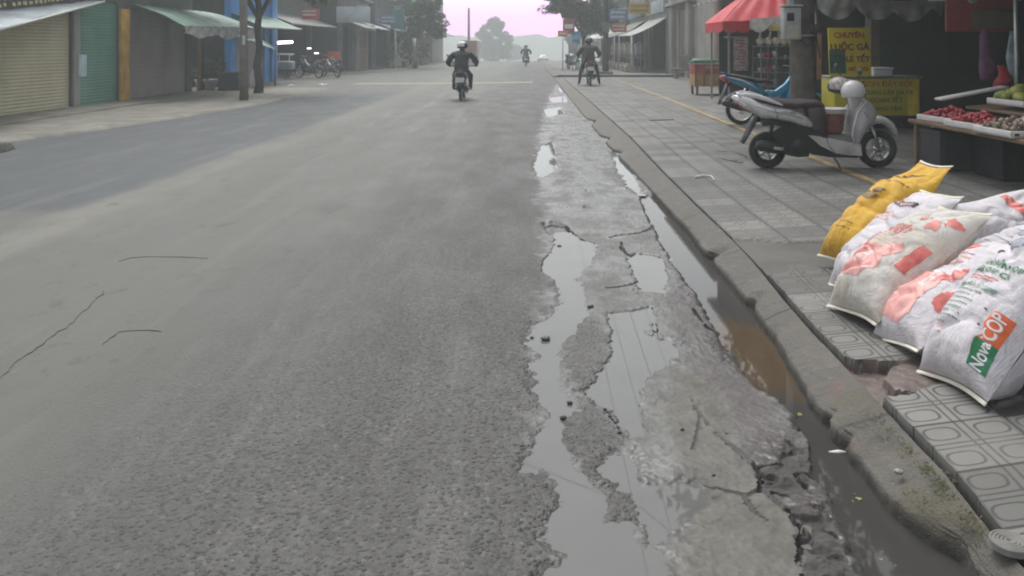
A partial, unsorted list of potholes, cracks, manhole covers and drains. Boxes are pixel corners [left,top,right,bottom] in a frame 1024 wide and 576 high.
crack [691,308,716,333]
pothole [586,307,675,438]
pothole [541,220,598,272]
crack [0,291,104,378]
crack [689,396,806,576]
